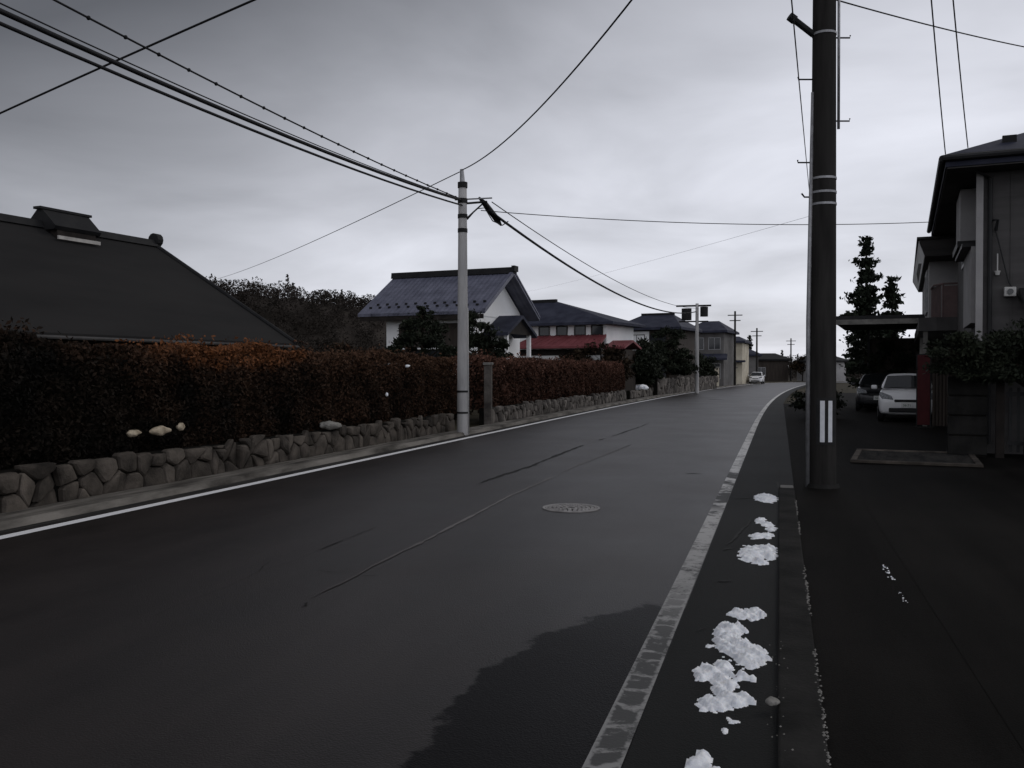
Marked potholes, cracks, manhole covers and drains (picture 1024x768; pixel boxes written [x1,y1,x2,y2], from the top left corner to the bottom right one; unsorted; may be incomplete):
manhole cover [543,503,600,513]
